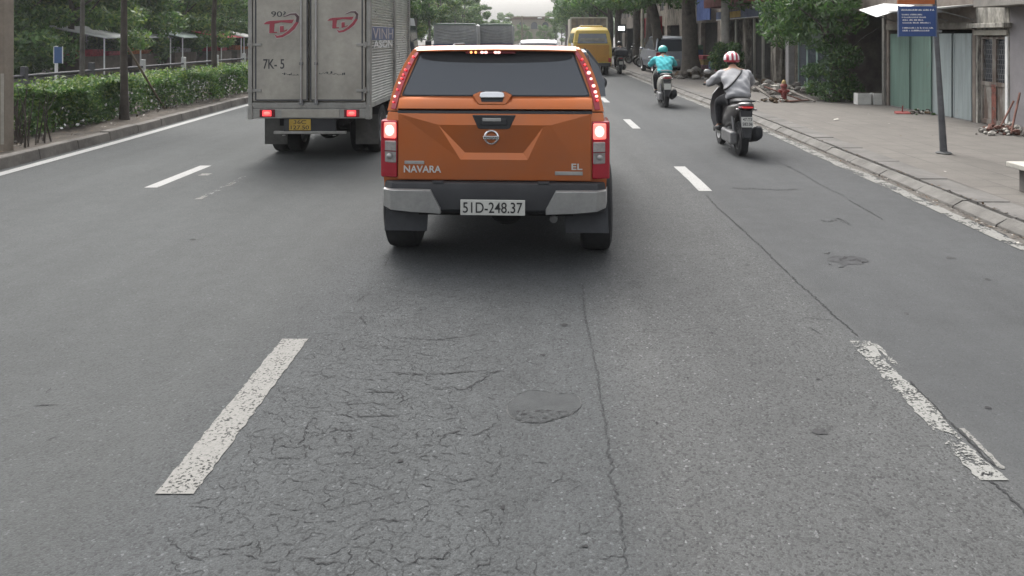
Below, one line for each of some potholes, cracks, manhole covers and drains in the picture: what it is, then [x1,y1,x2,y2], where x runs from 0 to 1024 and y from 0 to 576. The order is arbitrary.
crack [269,320,503,459]
crack [737,162,843,195]
